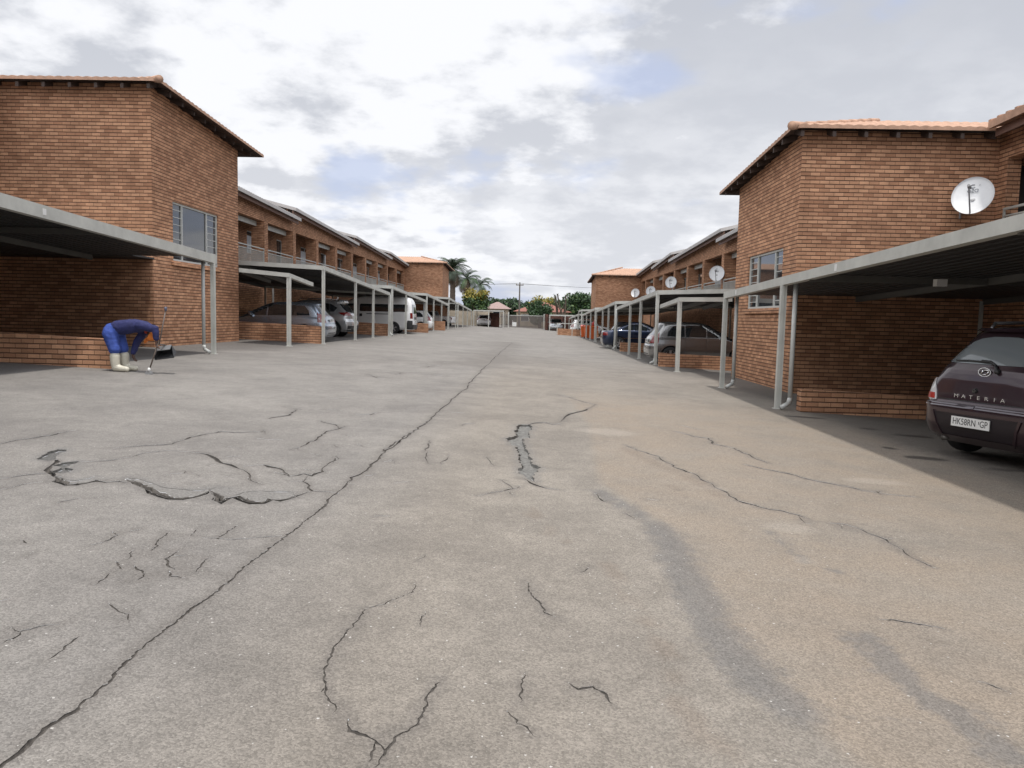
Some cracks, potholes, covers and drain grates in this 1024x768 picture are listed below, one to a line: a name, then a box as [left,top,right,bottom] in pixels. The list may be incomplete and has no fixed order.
crack [321,586,440,766]
crack [507,675,533,735]
crack [834,523,932,567]
crack [5,625,78,659]
crack [687,434,911,497]
crack [569,683,611,703]
crack [529,398,593,425]
crack [628,446,805,523]
crack [92,529,207,585]
crack [528,583,552,616]
crack [7,409,376,504]
